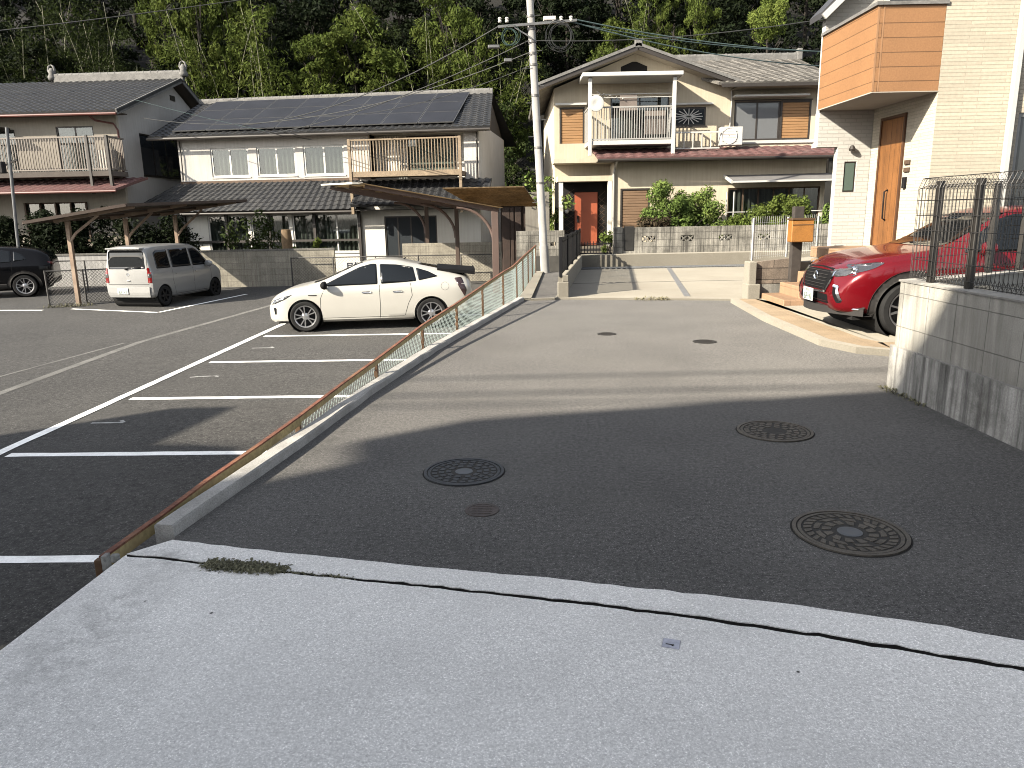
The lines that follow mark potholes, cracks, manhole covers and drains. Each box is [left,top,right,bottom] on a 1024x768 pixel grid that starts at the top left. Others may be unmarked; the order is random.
manhole cover [423,458,505,487]
manhole cover [735,420,815,443]
manhole cover [465,503,499,517]
manhole cover [790,510,913,558]
crack [127,555,1024,671]
